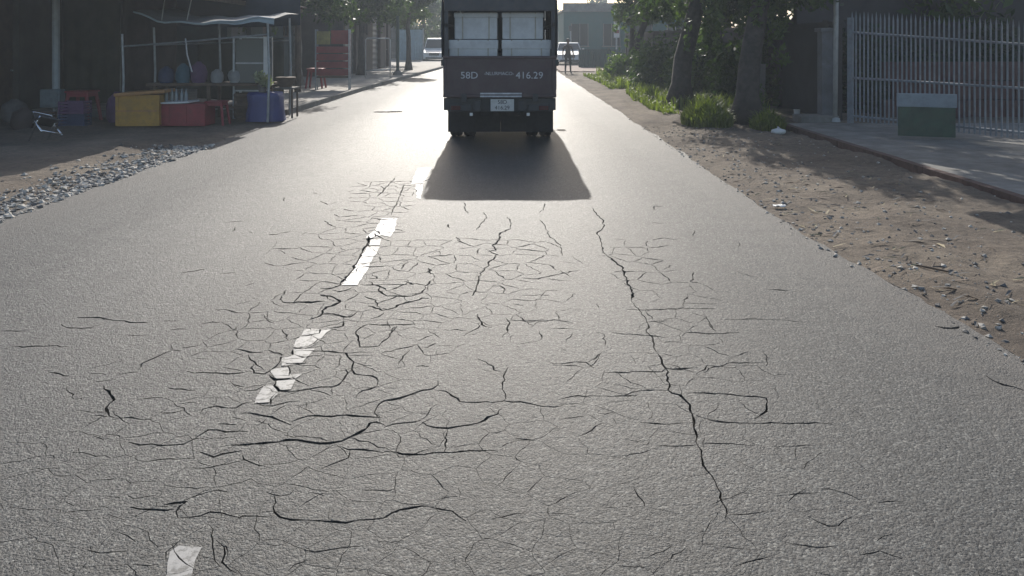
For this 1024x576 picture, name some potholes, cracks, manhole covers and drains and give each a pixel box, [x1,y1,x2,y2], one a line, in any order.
crack [559,206,1004,576]
